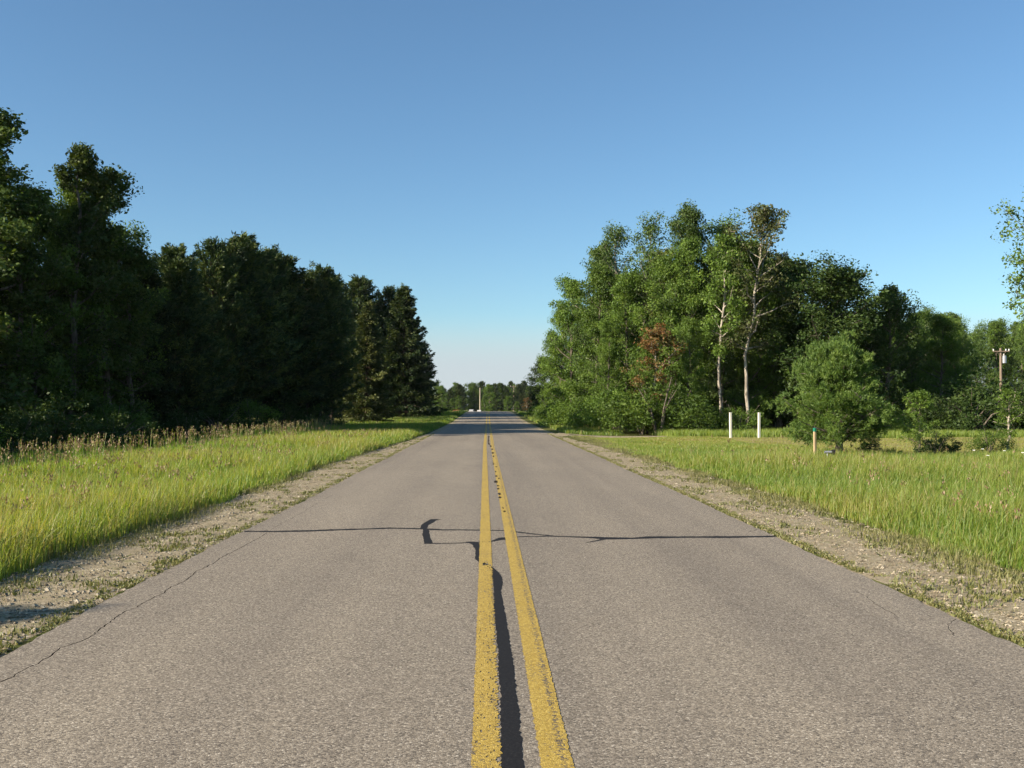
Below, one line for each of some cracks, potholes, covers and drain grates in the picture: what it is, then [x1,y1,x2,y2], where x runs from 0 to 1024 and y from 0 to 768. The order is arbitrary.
crack [1,497,328,682]
